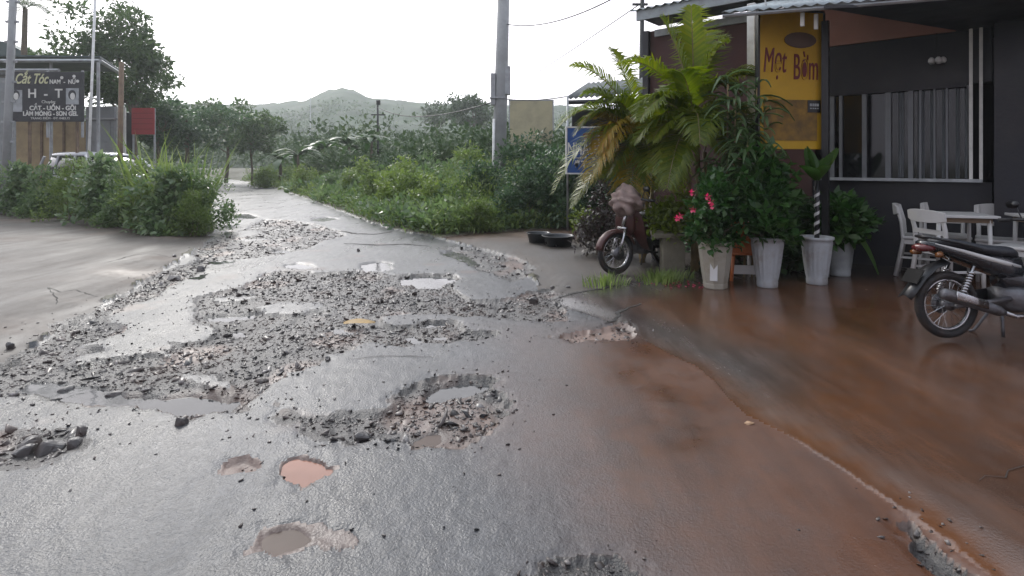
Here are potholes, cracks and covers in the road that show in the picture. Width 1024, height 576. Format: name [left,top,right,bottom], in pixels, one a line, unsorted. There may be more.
pothole [279,454,340,491]
pothole [271,373,513,450]
pothole [530,553,641,576]
pothole [168,269,568,414]
pothole [217,454,261,476]
pothole [243,521,359,558]
pothole [547,322,637,343]
pothole [0,424,92,471]
